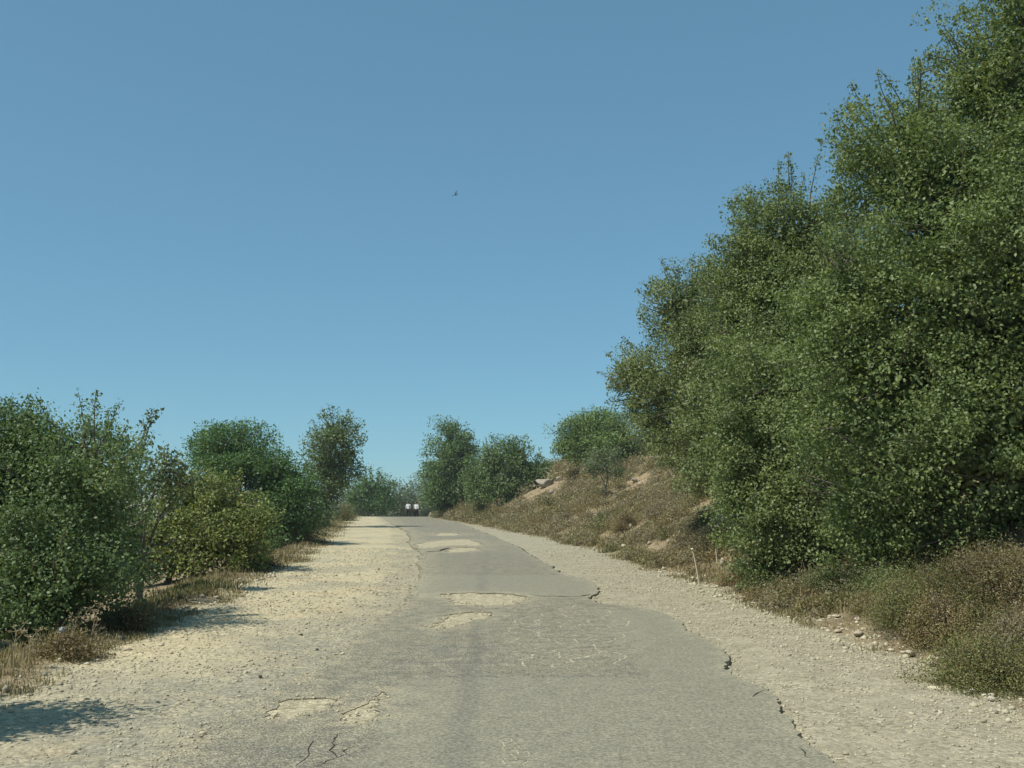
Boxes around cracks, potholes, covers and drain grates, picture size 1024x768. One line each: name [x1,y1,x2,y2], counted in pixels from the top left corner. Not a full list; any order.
pothole [440,592,527,607]
pothole [415,539,486,548]
crack [286,730,354,767]
pothole [430,612,492,630]
pothole [340,691,387,723]
pothole [263,698,338,719]
